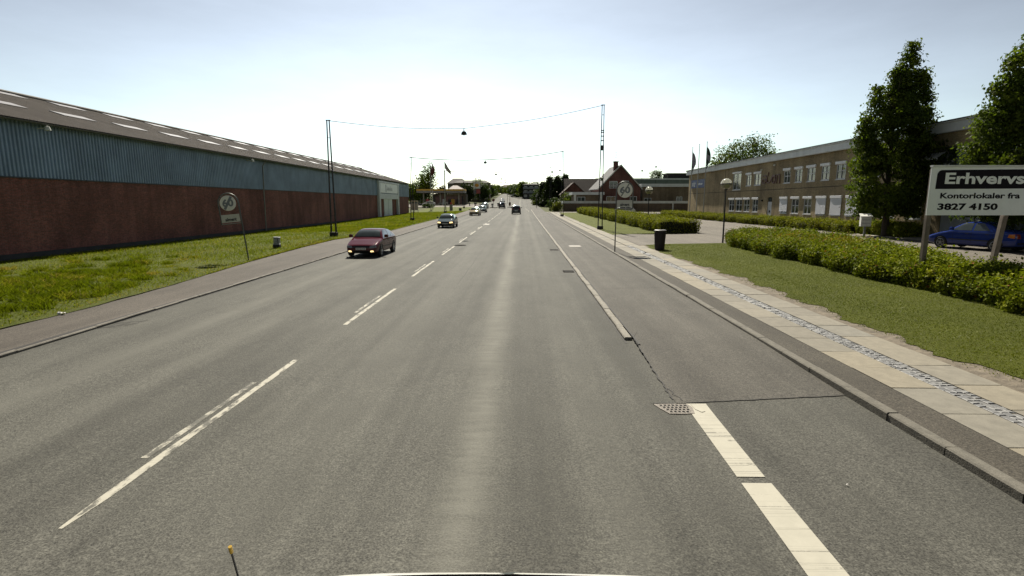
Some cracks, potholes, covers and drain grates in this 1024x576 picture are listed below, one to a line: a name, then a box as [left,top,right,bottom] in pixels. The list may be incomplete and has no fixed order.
drain grate [653,404,705,415]
crack [634,332,683,401]
